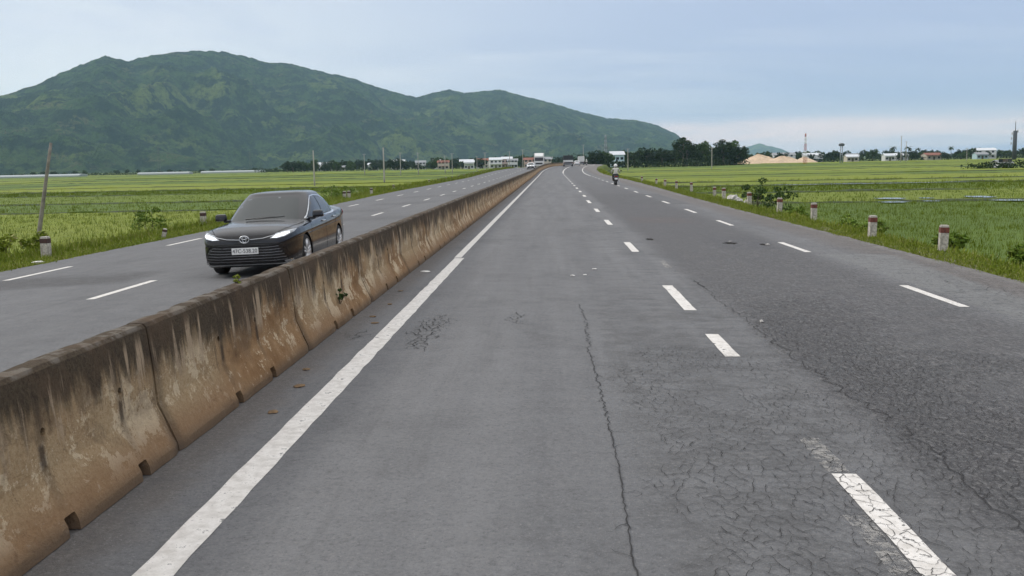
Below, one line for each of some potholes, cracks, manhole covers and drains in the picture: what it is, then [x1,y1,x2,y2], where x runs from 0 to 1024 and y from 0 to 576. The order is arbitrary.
crack [745,297,1024,532]
crack [577,304,639,576]
crack [611,345,1024,576]
